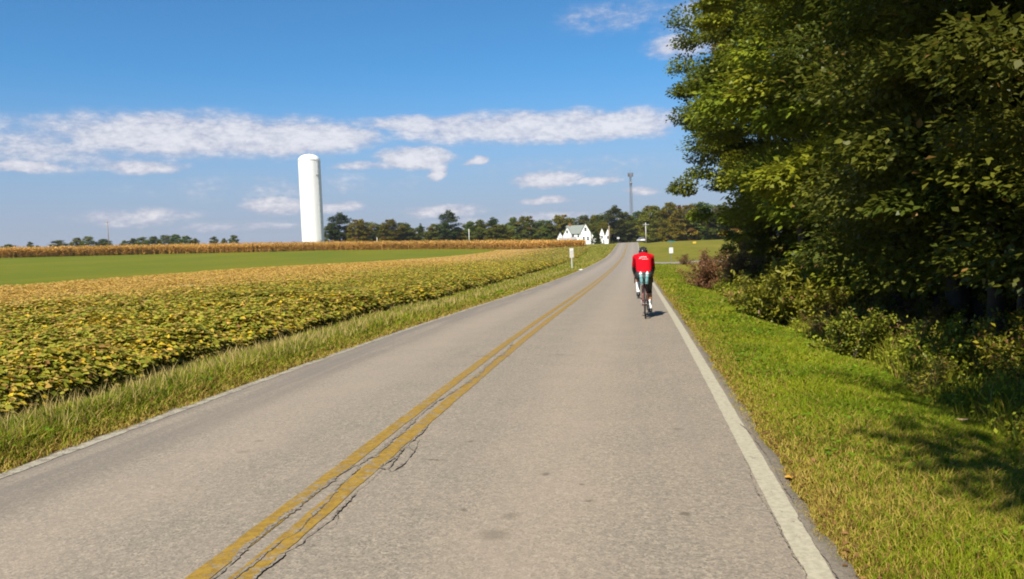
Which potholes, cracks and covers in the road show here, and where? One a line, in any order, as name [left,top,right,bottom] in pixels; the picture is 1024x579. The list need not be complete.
crack [212,342,564,579]
